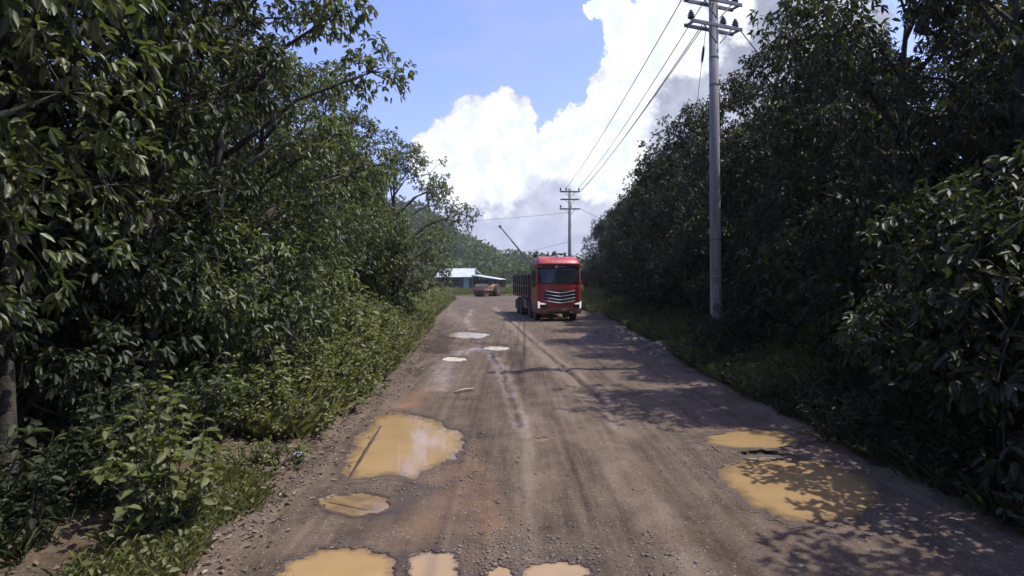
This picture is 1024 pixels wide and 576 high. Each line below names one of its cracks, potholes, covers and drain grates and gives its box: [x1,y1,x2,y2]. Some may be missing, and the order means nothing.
pothole [402,547,465,576]
pothole [485,562,516,576]
pothole [313,490,396,518]
pothole [263,543,404,576]
pothole [330,408,473,485]
pothole [442,331,493,339]
pothole [705,454,901,530]
pothole [515,557,598,576]
pothole [694,427,810,451]
